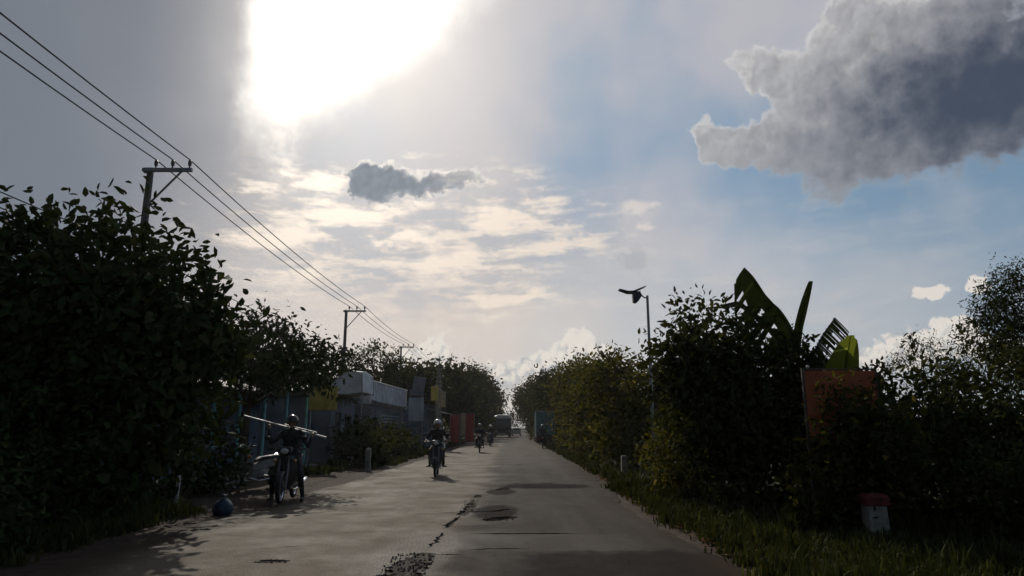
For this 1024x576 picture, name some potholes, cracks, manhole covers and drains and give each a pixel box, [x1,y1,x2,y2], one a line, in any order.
pothole [376,552,437,576]
crack [428,509,519,555]
